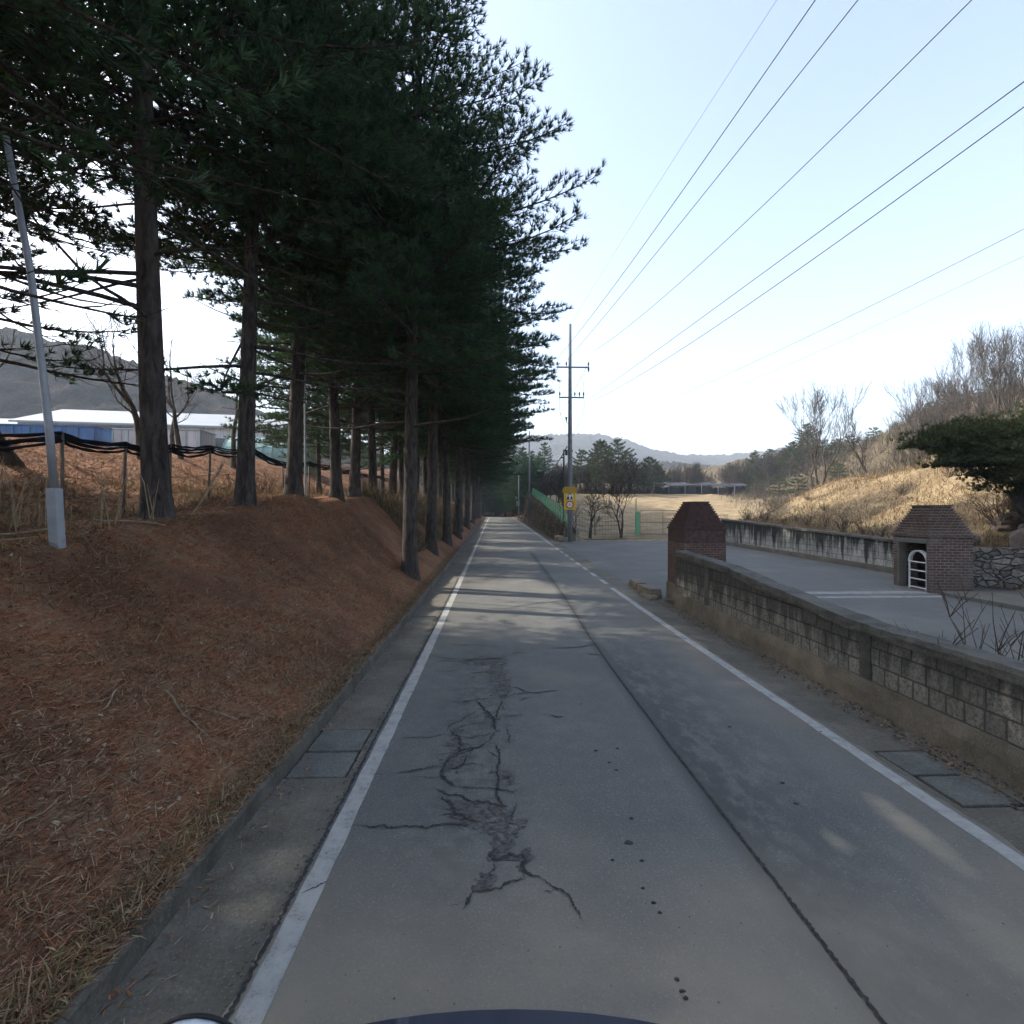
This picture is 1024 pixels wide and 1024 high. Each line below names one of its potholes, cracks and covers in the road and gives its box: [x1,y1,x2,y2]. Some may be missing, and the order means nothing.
crack [224,579,580,1020]
